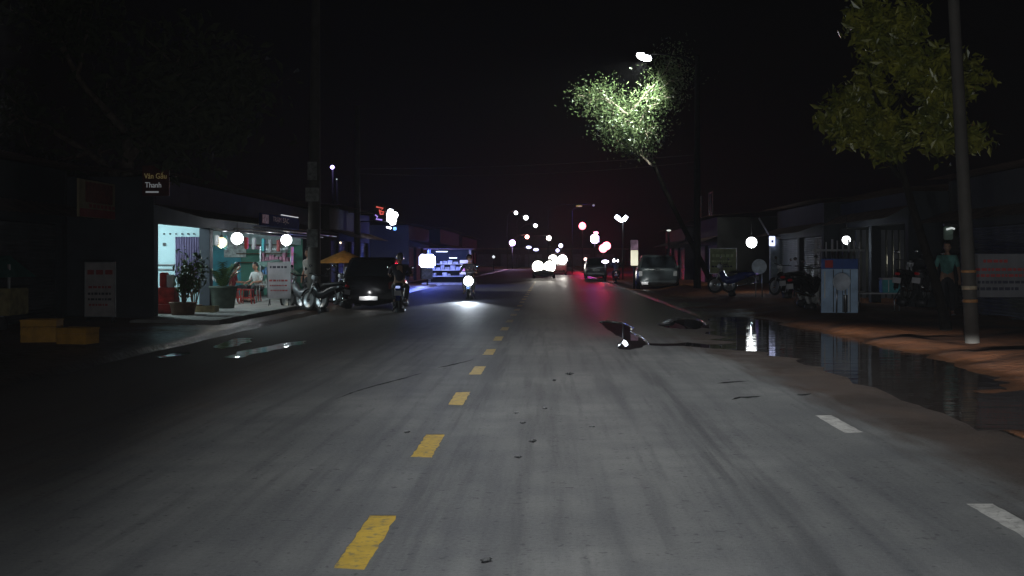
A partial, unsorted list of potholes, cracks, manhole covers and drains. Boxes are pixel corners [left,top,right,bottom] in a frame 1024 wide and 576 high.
pothole [657,317,706,326]
